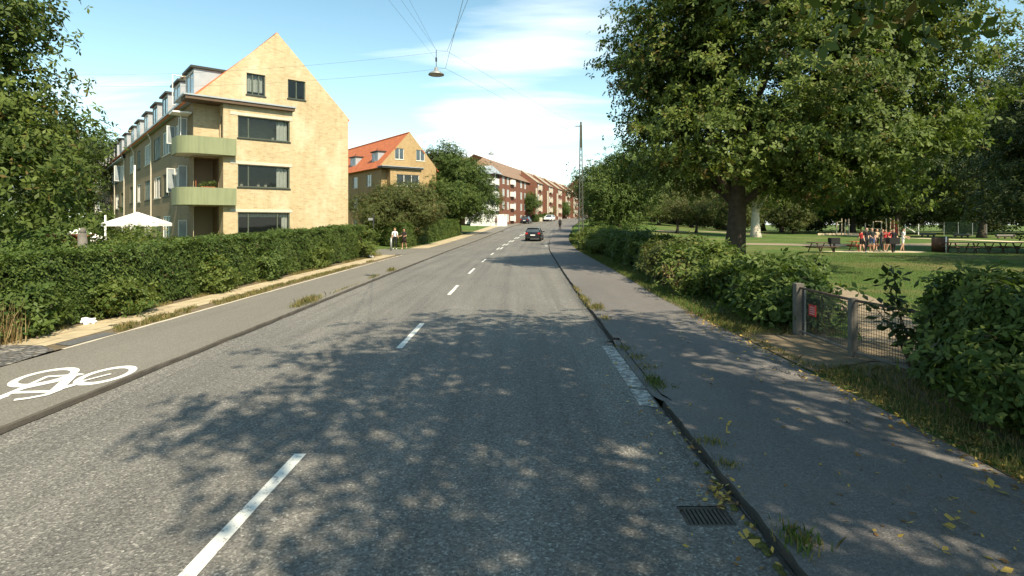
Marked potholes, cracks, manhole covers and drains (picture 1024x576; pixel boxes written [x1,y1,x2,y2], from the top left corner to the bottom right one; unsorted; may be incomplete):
drain grate [677,507,736,526]
